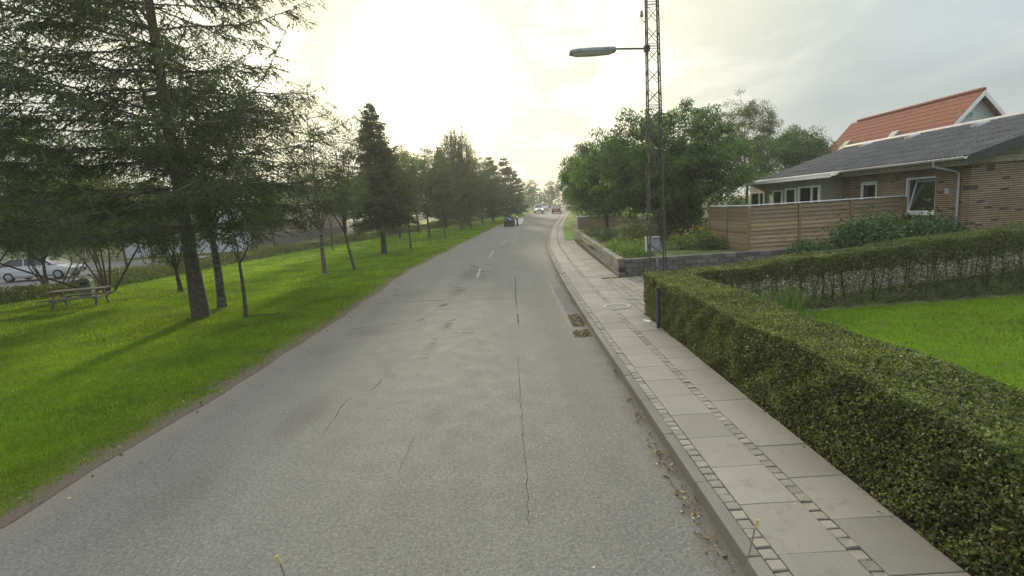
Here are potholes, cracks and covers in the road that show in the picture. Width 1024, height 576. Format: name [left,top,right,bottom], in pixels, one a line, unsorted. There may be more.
crack [516,355,530,531]
